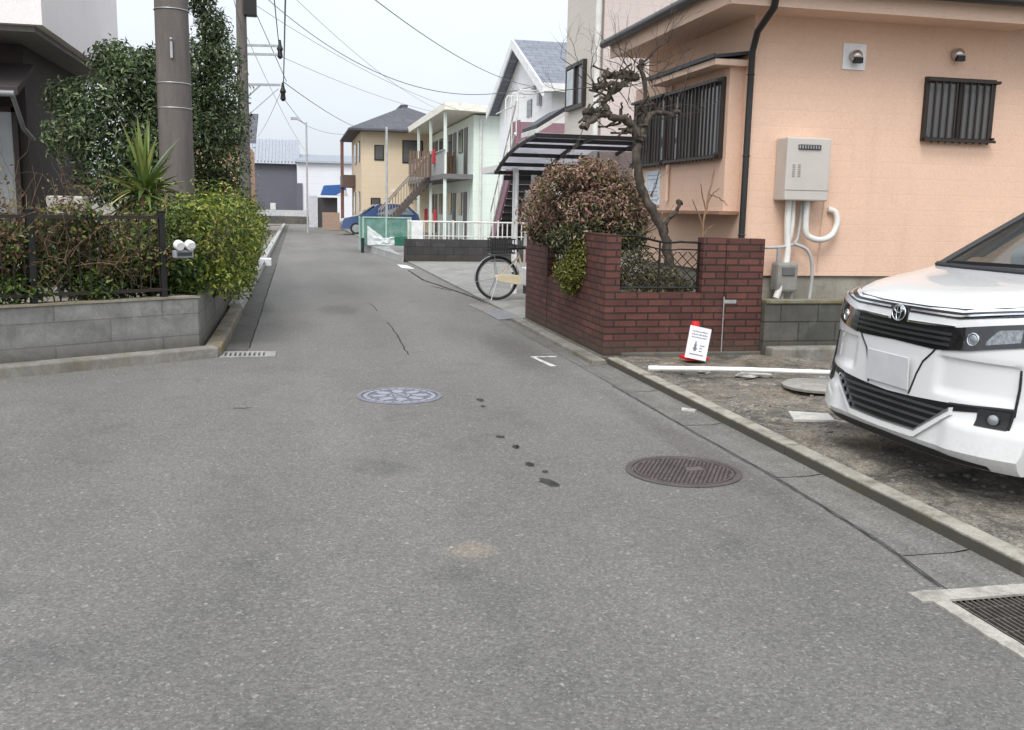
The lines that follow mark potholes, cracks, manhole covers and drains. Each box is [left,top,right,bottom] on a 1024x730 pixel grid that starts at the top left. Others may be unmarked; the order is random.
crack [408,270,482,302]
manhole cover [356,387,442,405]
crack [370,304,409,355]
drain grate [907,584,1024,660]
manhole cover [625,456,742,488]
